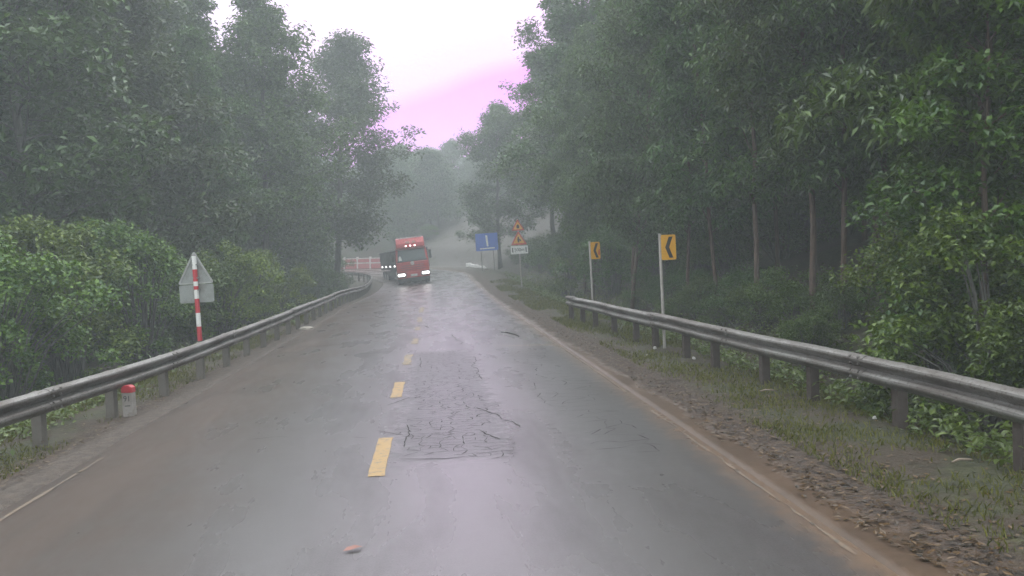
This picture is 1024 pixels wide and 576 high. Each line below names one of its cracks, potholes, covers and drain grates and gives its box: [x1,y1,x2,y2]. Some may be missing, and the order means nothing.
crack [509,351,663,452]
crack [376,351,526,459]
